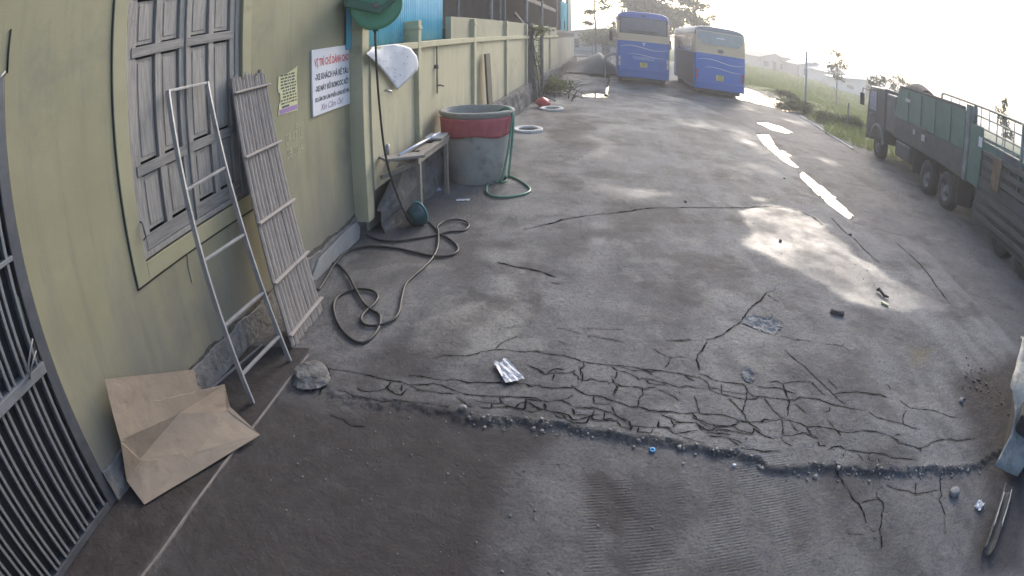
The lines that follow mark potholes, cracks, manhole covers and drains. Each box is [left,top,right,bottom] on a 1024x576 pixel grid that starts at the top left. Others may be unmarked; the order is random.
crack [525,206,823,229]
crack [319,290,976,462]
crack [833,461,946,547]
crack [497,262,557,284]
